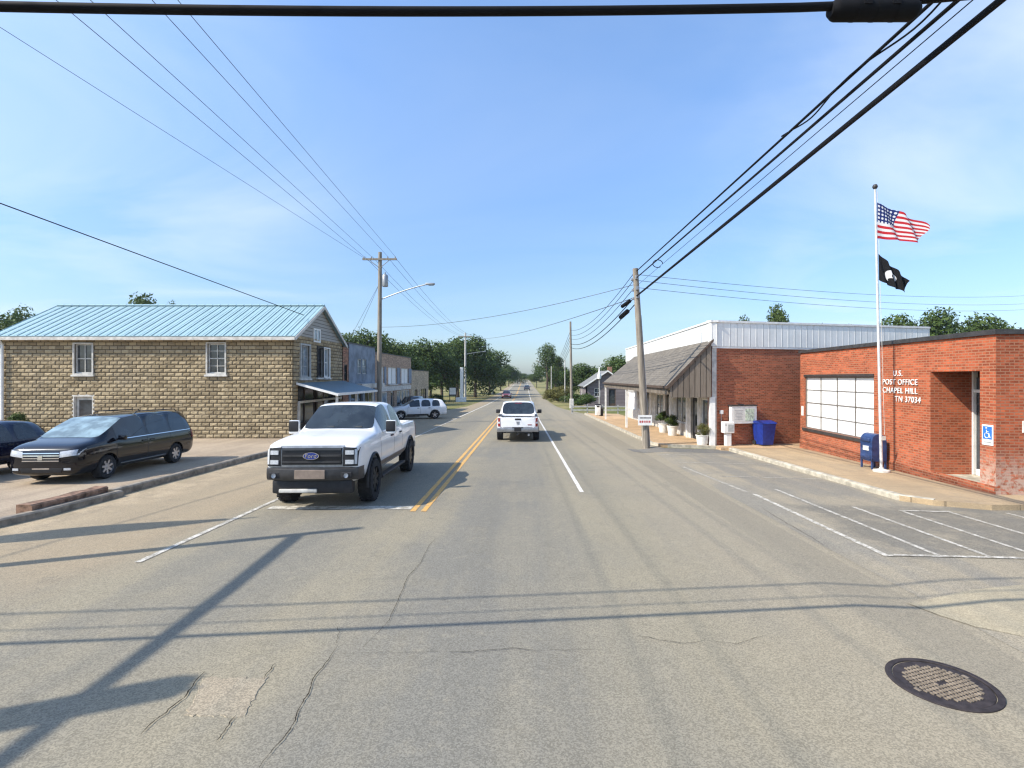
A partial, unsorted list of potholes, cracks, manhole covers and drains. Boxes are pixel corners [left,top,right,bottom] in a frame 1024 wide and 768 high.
crack [141,671,215,734]
crack [259,542,592,767]
manhole cover [885,658,1006,713]
